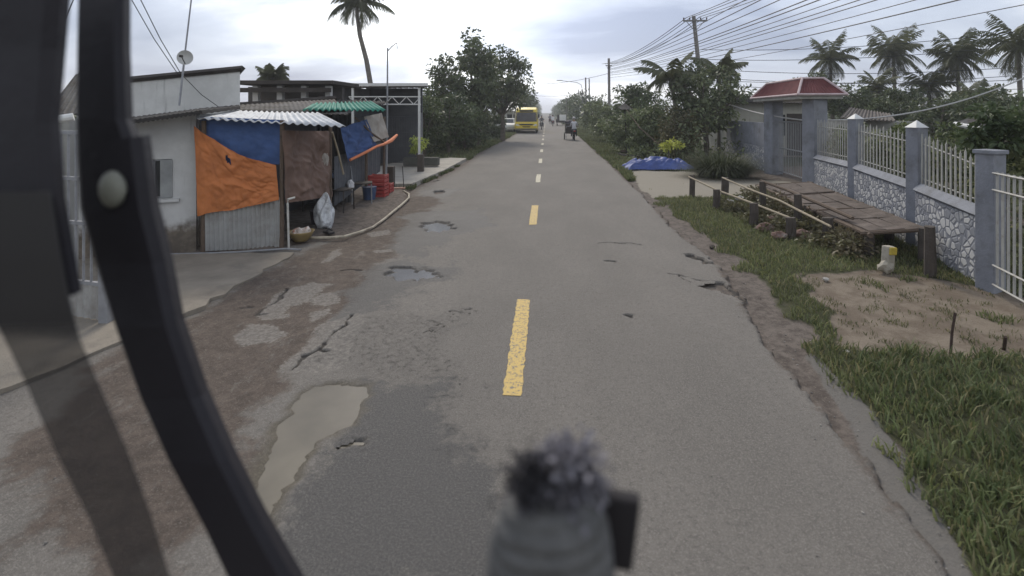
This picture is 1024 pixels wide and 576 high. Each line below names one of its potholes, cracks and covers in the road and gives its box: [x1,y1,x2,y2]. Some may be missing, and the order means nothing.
pothole [373,263,447,285]
crack [663,272,715,286]
pothole [210,374,386,576]
crack [233,286,361,375]
pothole [411,219,461,234]
